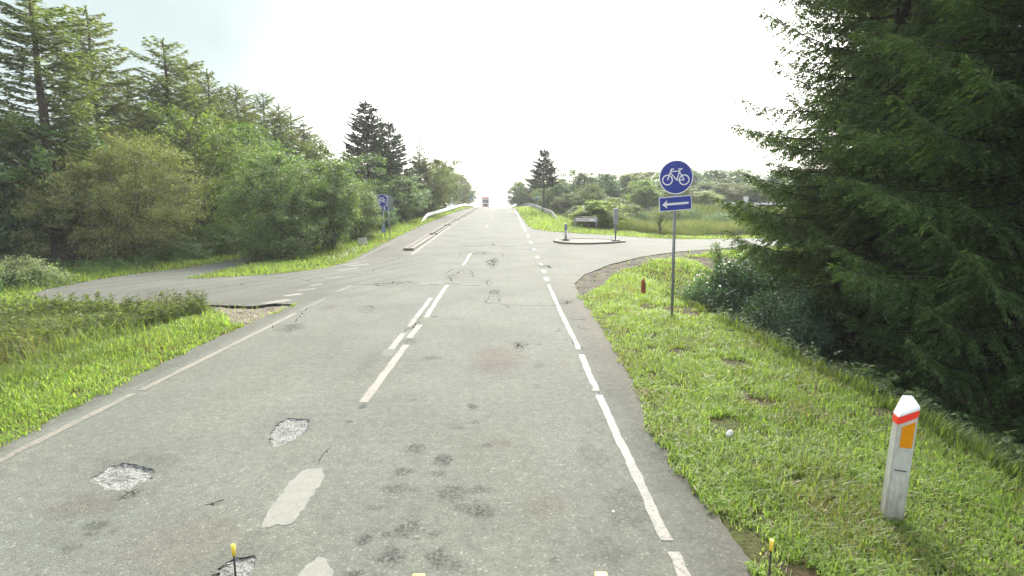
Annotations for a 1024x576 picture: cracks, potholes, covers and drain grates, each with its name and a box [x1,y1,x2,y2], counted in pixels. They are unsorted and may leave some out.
pothole [88,463,155,491]
pothole [211,556,256,576]
crack [343,244,584,354]
pothole [268,418,310,447]
